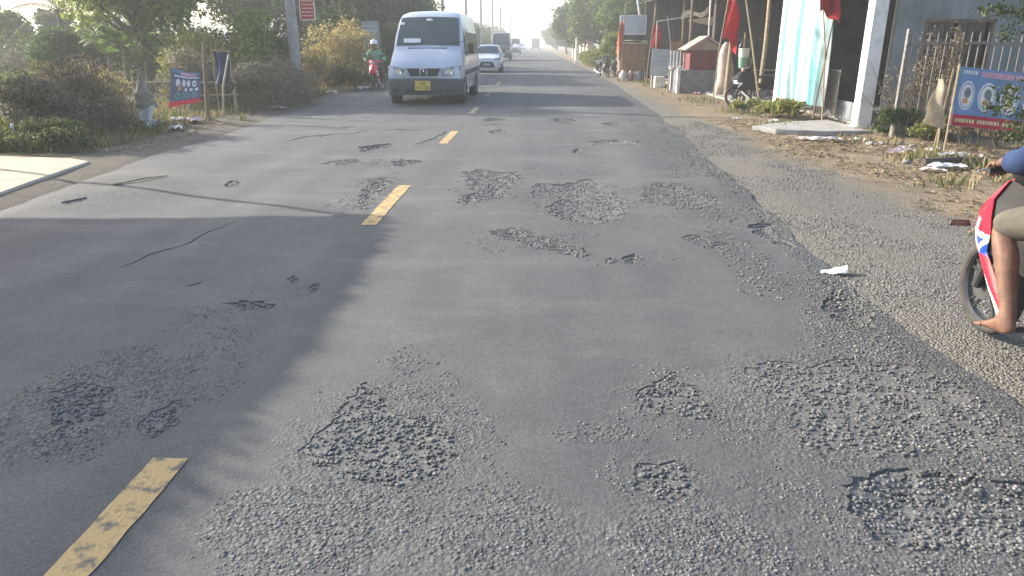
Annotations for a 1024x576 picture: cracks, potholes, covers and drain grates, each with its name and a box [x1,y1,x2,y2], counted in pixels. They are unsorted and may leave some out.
pothole [633,460,701,506]
pothole [48,382,118,438]
pothole [489,228,592,258]
pothole [621,253,643,264]
pothole [223,300,277,311]
pothole [681,235,732,250]
pothole [635,372,716,422]
crack [290,126,450,145]
pothole [839,467,1024,558]
pothole [640,182,723,210]
pothole [137,398,190,438]
pothole [358,177,395,210]
